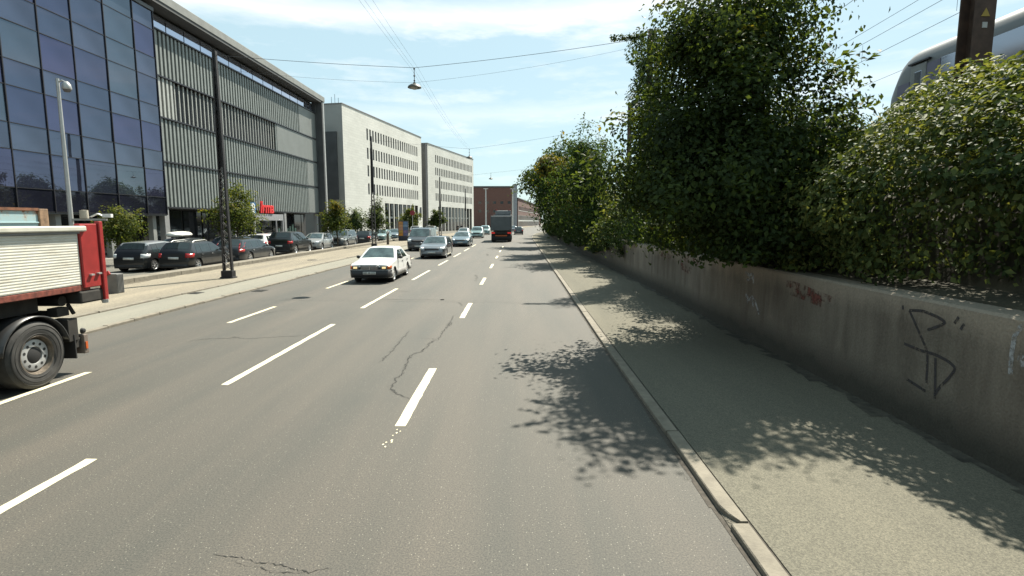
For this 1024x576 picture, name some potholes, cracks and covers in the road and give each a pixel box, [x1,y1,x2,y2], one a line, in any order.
crack [390,303,462,397]
crack [216,554,329,573]
